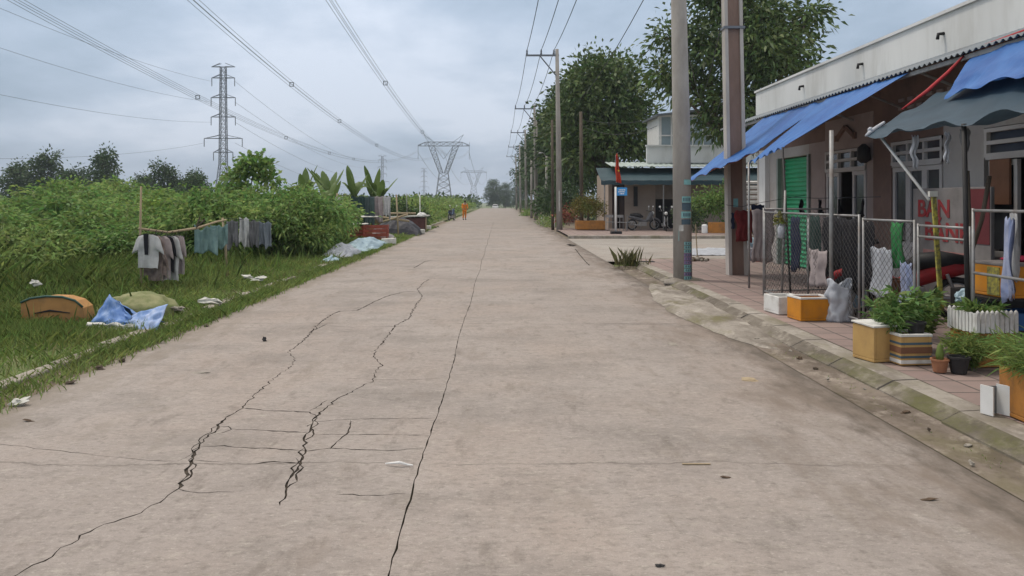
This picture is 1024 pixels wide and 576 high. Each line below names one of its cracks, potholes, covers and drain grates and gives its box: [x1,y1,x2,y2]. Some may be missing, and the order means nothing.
crack [2,278,436,576]
